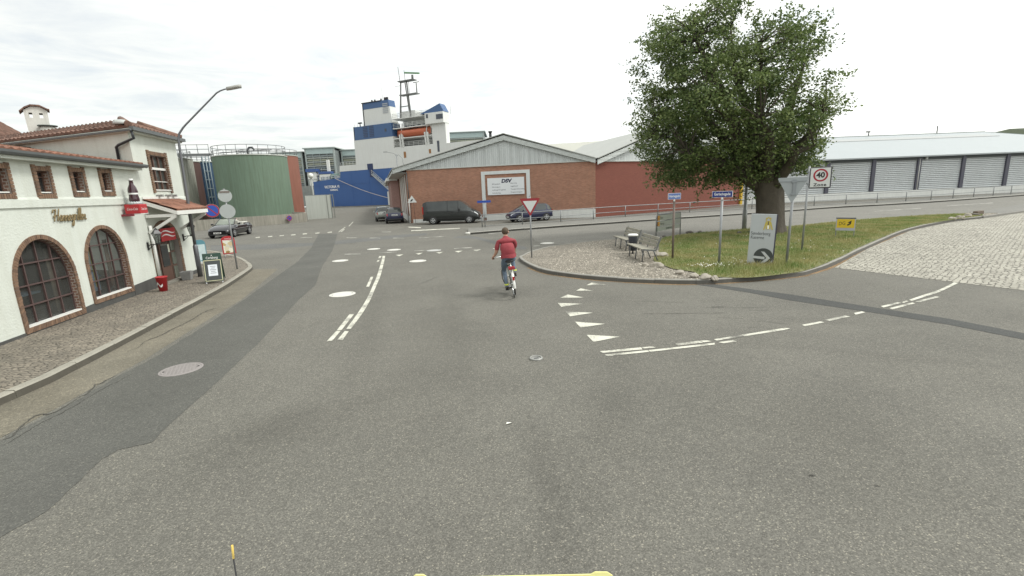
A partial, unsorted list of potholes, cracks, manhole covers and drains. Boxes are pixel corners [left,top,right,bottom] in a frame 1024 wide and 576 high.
crack [1,376,127,444]
manhole cover [158,362,204,377]
